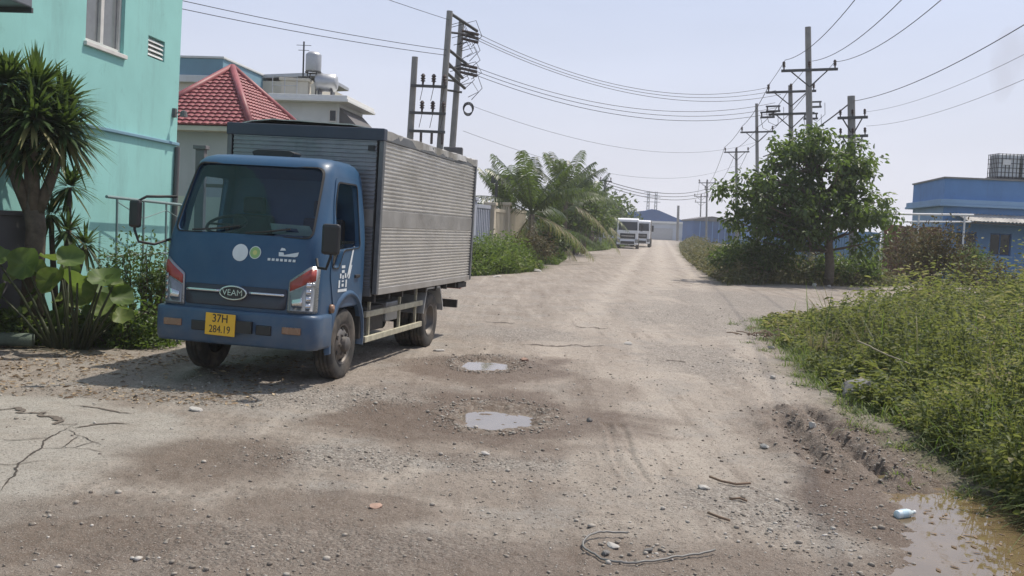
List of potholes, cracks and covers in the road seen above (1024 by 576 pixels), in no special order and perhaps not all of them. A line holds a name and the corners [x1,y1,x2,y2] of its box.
pothole [446,353,527,374]
crack [522,326,605,347]
pothole [426,396,563,436]
crack [1,405,129,490]
